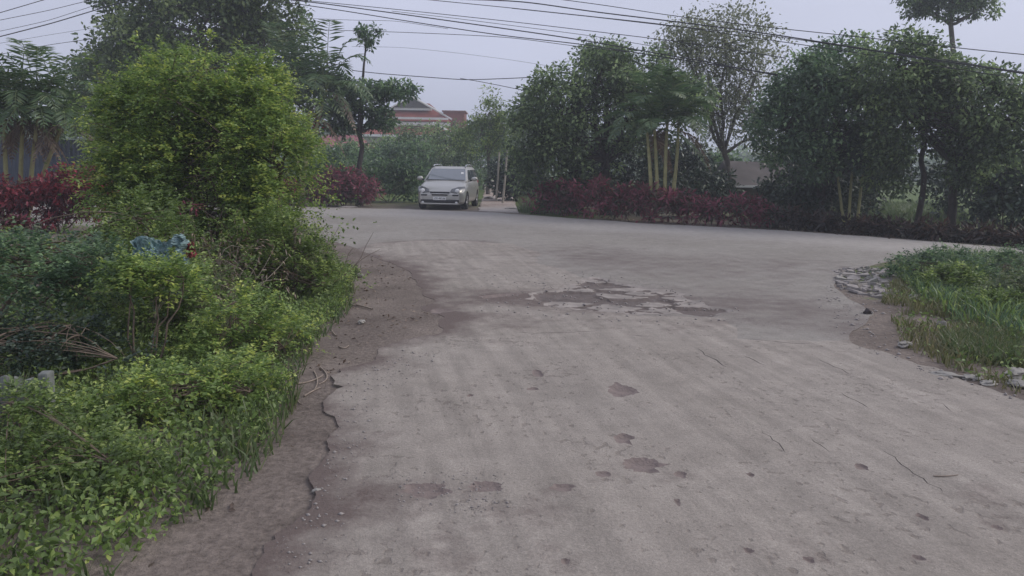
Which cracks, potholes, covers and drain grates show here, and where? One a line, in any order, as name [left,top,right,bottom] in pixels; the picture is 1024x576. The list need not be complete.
pothole [468,481,503,492]
pothole [400,483,453,500]
pothole [549,484,576,492]
pothole [622,457,670,473]
pothole [608,382,640,397]
pothole [613,433,635,445]
pothole [526,277,732,317]
